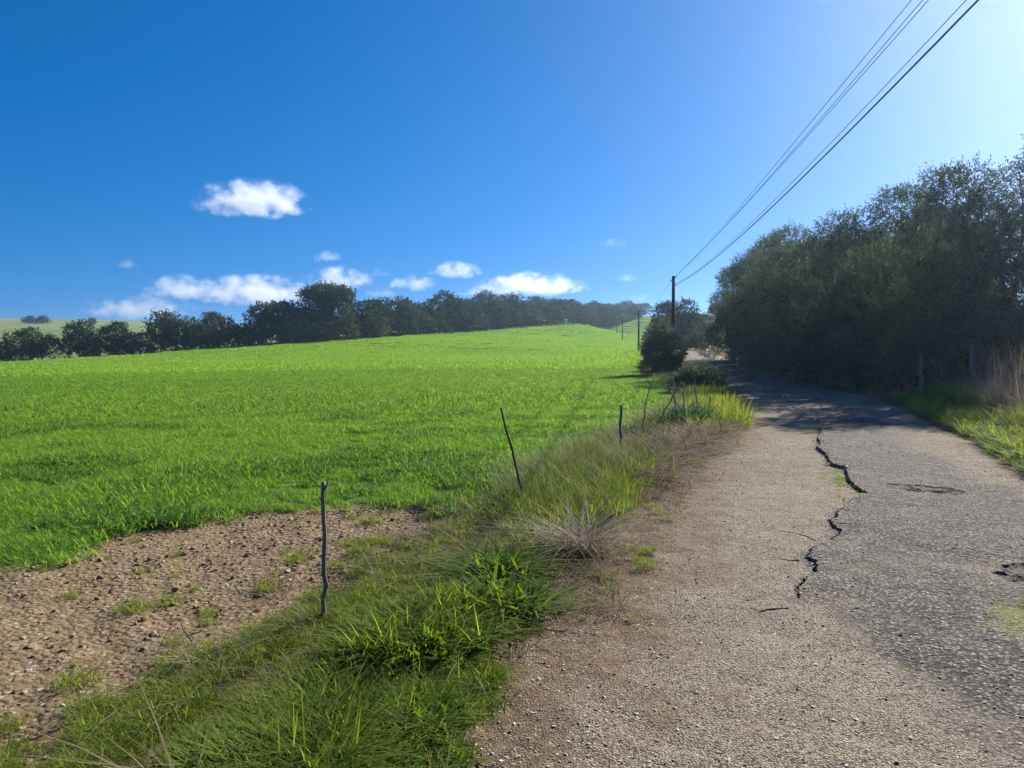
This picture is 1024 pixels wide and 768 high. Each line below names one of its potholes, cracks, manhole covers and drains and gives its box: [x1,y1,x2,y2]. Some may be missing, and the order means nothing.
crack [759,427,867,613]
pothole [991,563,1024,585]
pothole [885,483,965,495]
